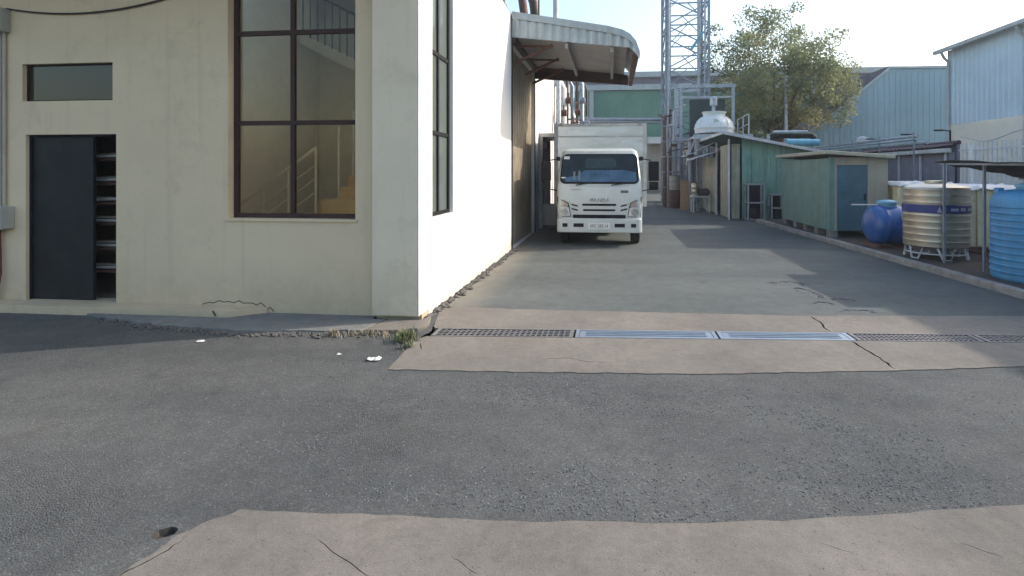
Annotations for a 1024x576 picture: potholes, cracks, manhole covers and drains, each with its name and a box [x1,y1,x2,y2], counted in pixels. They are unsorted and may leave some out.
pothole [152,527,178,539]
drain grate [848,333,985,342]
drain grate [431,328,574,338]
drain grate [972,334,1024,343]
